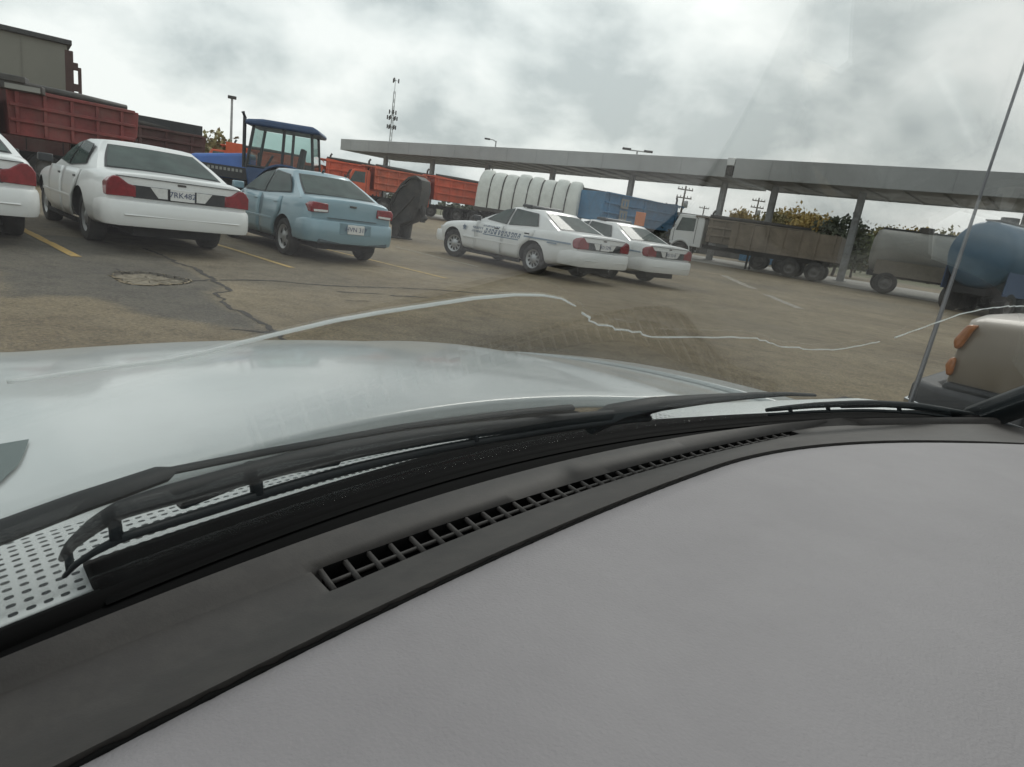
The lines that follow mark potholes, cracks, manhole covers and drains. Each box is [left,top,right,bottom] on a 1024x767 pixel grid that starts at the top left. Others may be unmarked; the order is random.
crack [142,248,494,340]
